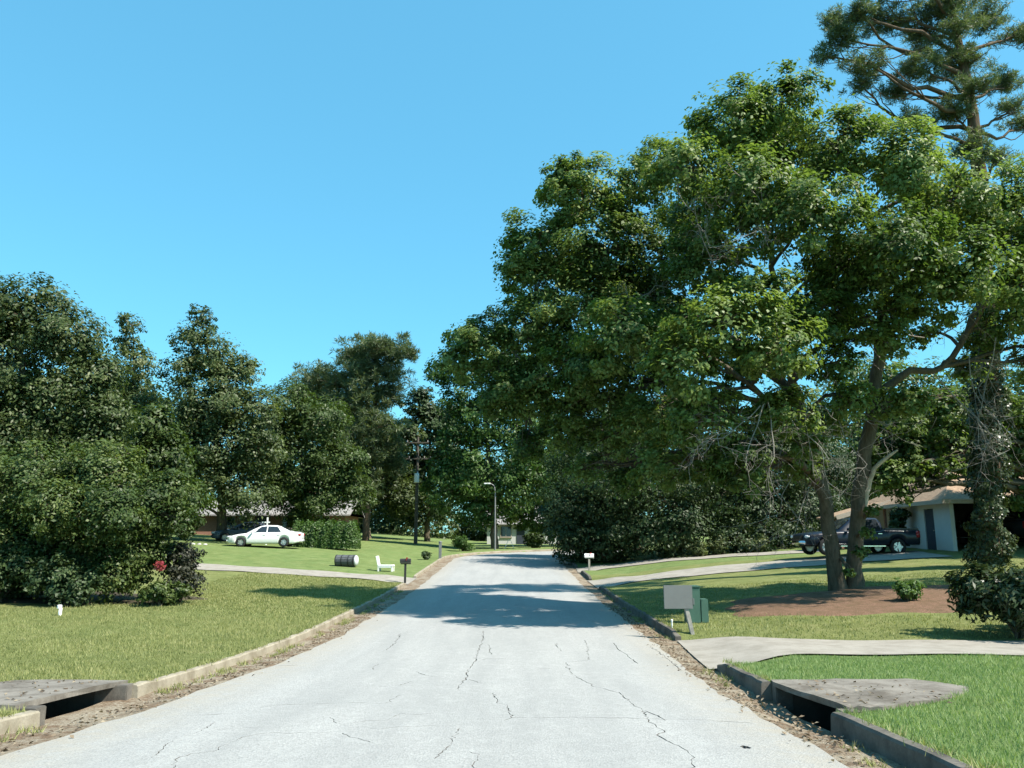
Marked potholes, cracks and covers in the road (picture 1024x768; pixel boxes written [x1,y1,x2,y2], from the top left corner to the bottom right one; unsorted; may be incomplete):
crack [332,634,433,742]
crack [155,714,314,768]
drain grate [771,678,969,731]
drain grate [0,679,134,726]
crack [457,632,748,768]
